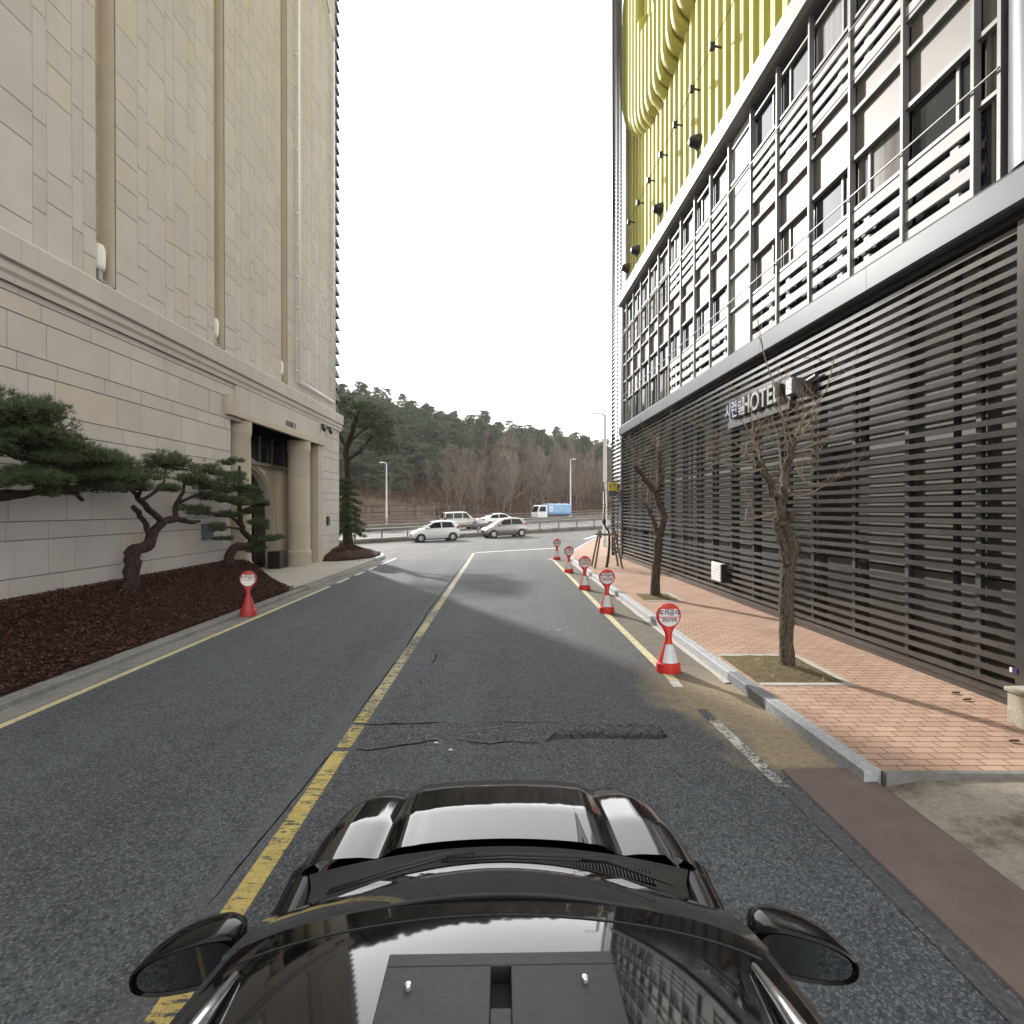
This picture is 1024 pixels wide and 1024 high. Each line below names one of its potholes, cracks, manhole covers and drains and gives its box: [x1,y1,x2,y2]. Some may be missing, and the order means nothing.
pothole [546,723,668,742]
crack [356,721,553,751]
